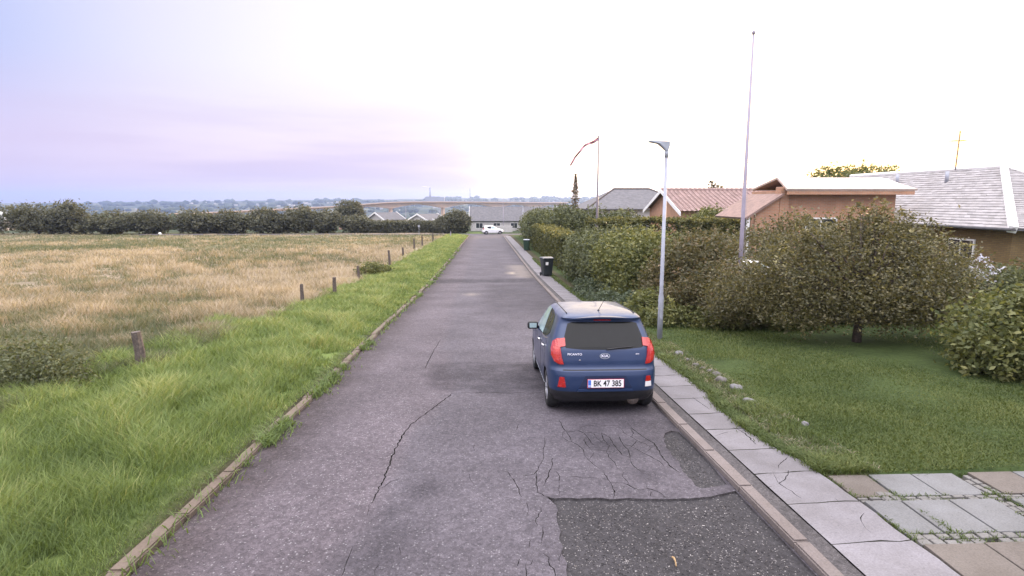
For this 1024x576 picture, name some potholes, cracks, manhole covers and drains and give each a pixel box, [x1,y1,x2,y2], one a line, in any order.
crack [507,420,677,576]
crack [367,392,542,514]
pothole [664,431,727,488]
